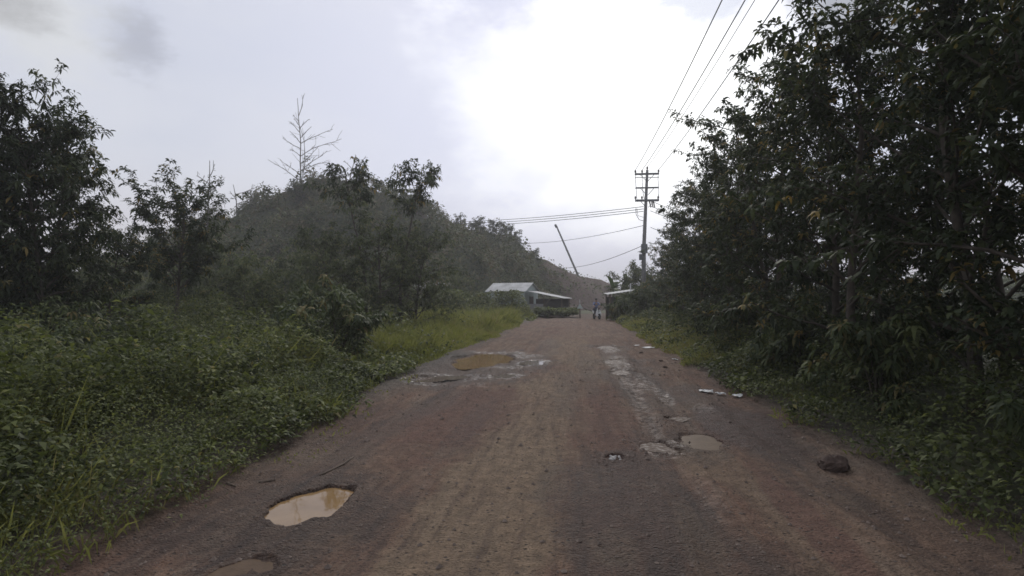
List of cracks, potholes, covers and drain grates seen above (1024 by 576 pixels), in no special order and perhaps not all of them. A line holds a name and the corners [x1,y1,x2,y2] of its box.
pothole [665,431,733,453]
pothole [443,353,523,372]
pothole [631,439,693,456]
pothole [253,482,363,529]
pothole [596,451,634,463]
pothole [199,548,291,576]
